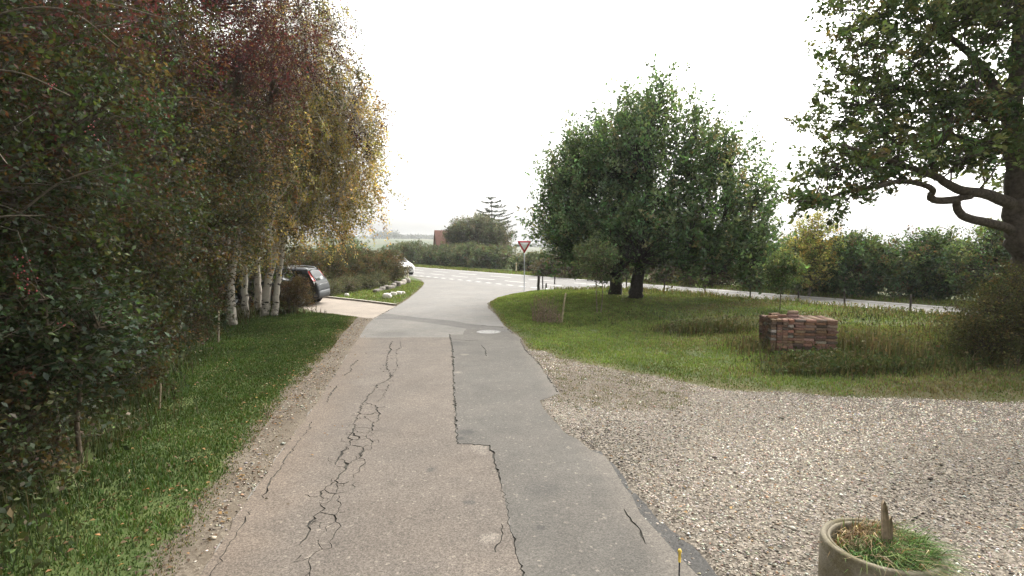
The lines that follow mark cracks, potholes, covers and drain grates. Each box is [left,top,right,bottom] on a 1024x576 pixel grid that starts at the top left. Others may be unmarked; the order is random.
crack [295,341,402,576]
crack [624,509,646,544]
crack [466,325,558,392]
crack [209,422,312,576]
